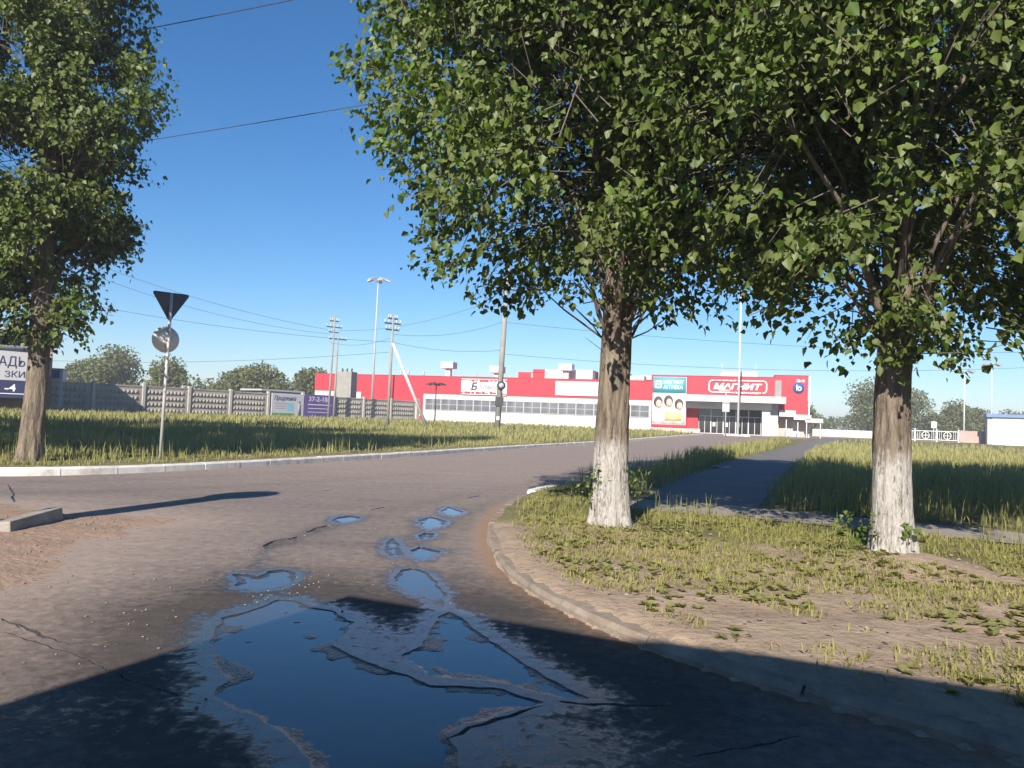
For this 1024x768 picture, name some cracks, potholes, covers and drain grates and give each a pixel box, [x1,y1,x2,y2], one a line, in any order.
crack [1,618,183,696]
pothole [385,538,404,557]
pothole [209,599,543,768]
pothole [232,569,296,591]
pothole [401,612,588,698]
crack [692,735,801,757]
pothole [394,568,448,607]
